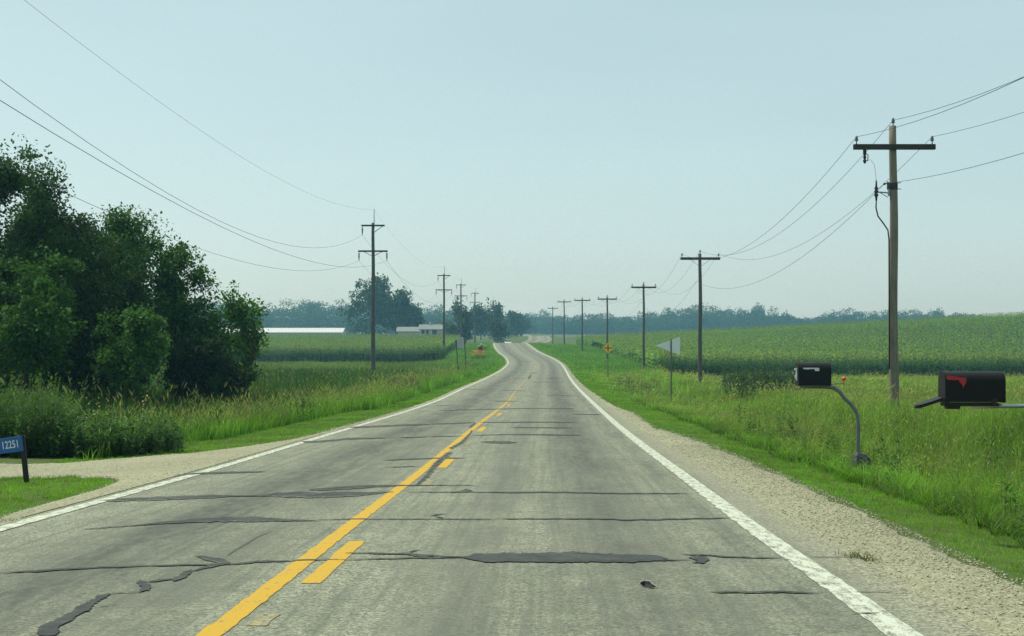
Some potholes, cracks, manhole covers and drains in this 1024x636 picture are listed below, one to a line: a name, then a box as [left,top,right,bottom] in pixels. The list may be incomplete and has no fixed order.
pothole [639,580,658,589]
crack [1,516,734,573]
